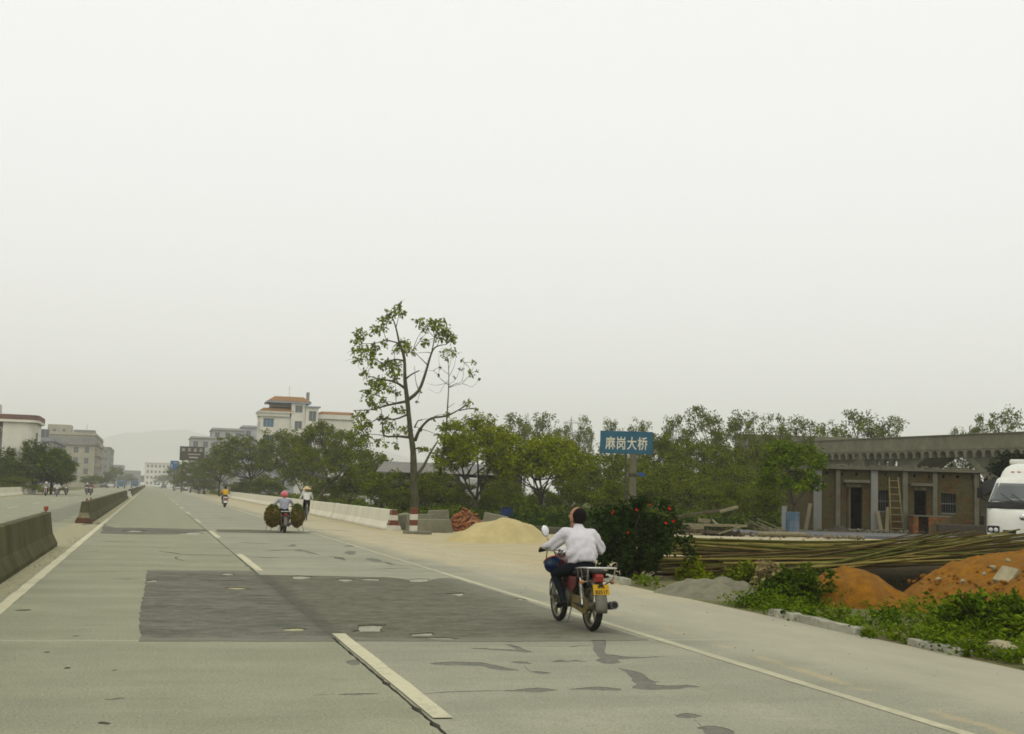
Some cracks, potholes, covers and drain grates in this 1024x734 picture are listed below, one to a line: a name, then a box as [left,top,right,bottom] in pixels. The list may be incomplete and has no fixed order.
crack [472,645,586,662]
